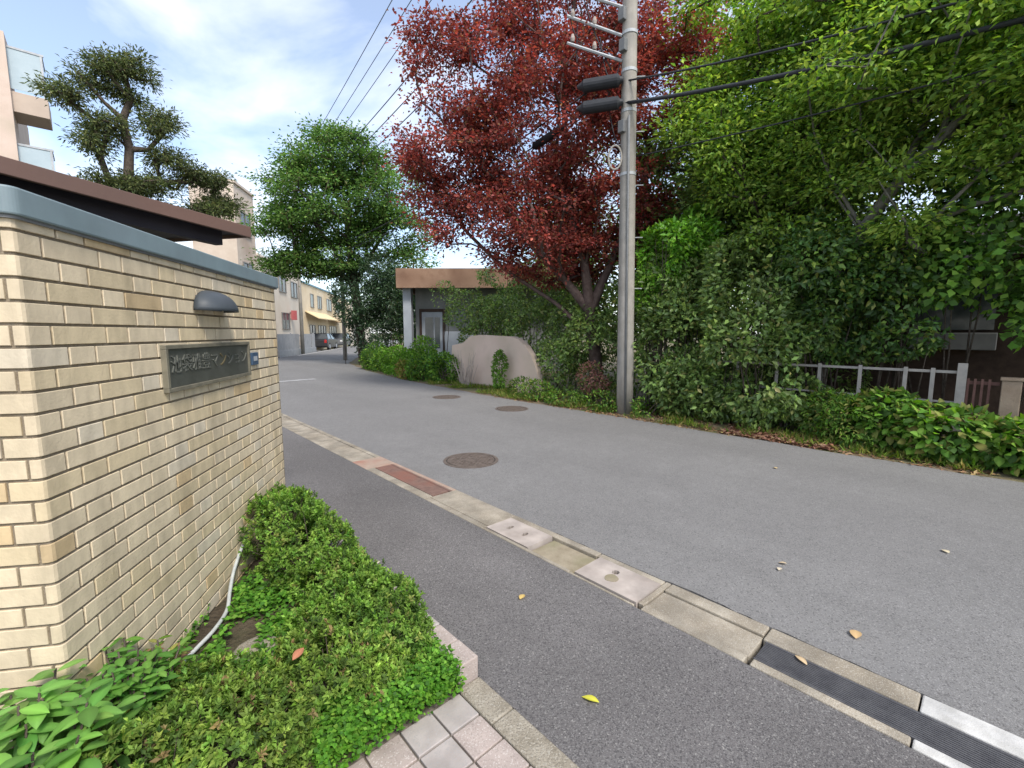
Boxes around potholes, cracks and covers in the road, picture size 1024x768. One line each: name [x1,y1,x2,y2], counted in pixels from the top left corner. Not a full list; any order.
drain grate [753,641,1024,768]
drain grate [376,464,451,497]
manhole cover [443,452,498,469]
